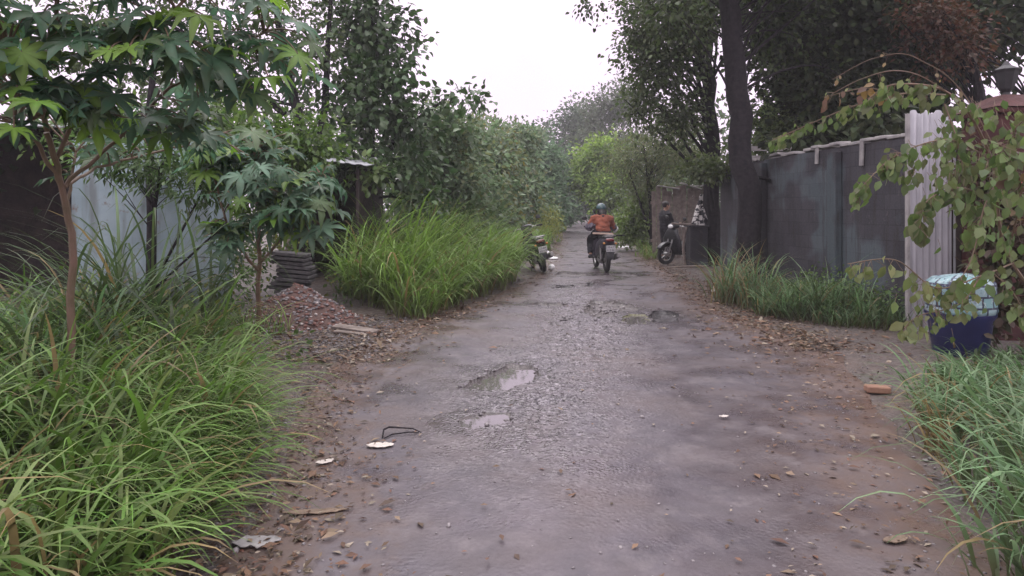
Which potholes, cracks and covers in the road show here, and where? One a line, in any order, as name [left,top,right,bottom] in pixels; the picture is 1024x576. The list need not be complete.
pothole [457,410,514,430]
pothole [621,312,650,325]
pothole [647,310,680,323]
pothole [458,363,540,391]
